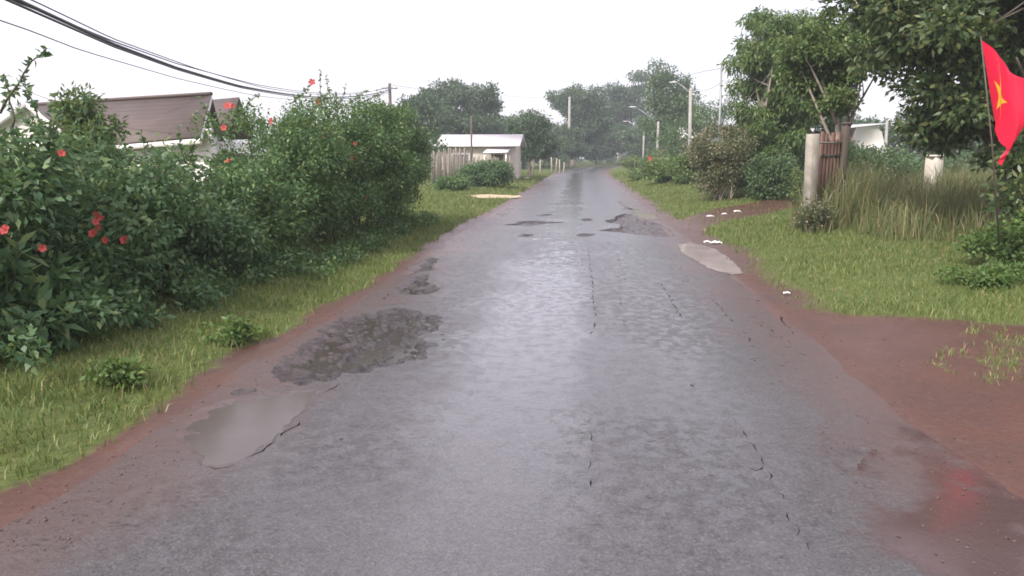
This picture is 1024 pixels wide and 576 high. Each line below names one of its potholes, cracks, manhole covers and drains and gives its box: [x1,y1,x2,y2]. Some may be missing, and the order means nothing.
pothole [407,257,439,275]
pothole [176,390,321,465]
crack [733,418,809,549]
pothole [231,387,257,395]
pothole [598,213,675,237]
pothole [394,273,441,295]
crack [707,297,806,368]
pothole [270,307,444,386]
